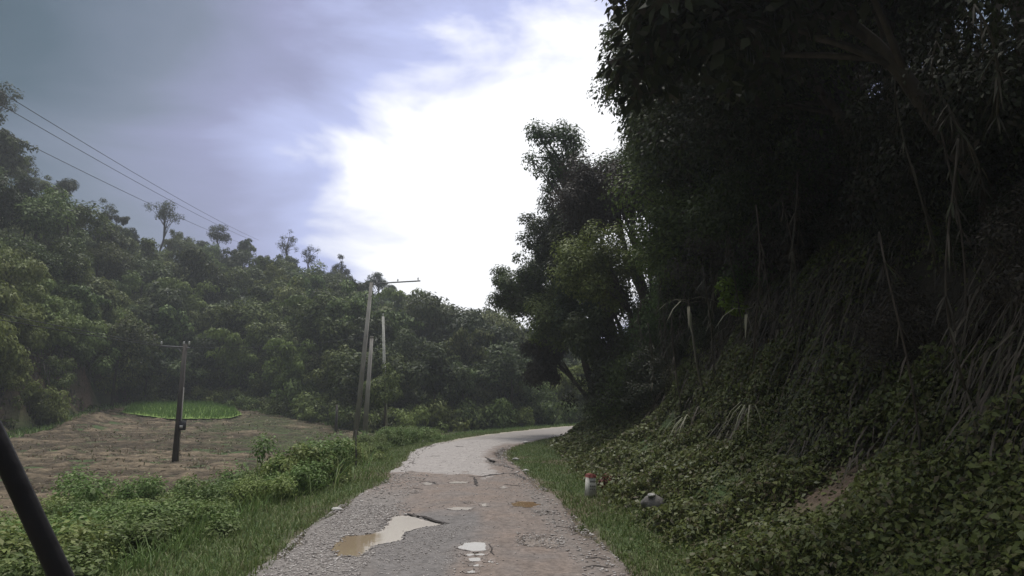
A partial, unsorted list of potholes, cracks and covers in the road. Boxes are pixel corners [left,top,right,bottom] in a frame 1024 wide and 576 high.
pothole [328,514,444,557]
pothole [464,554,486,562]
crack [472,457,526,486]
pothole [508,500,544,508]
pothole [455,540,490,552]
